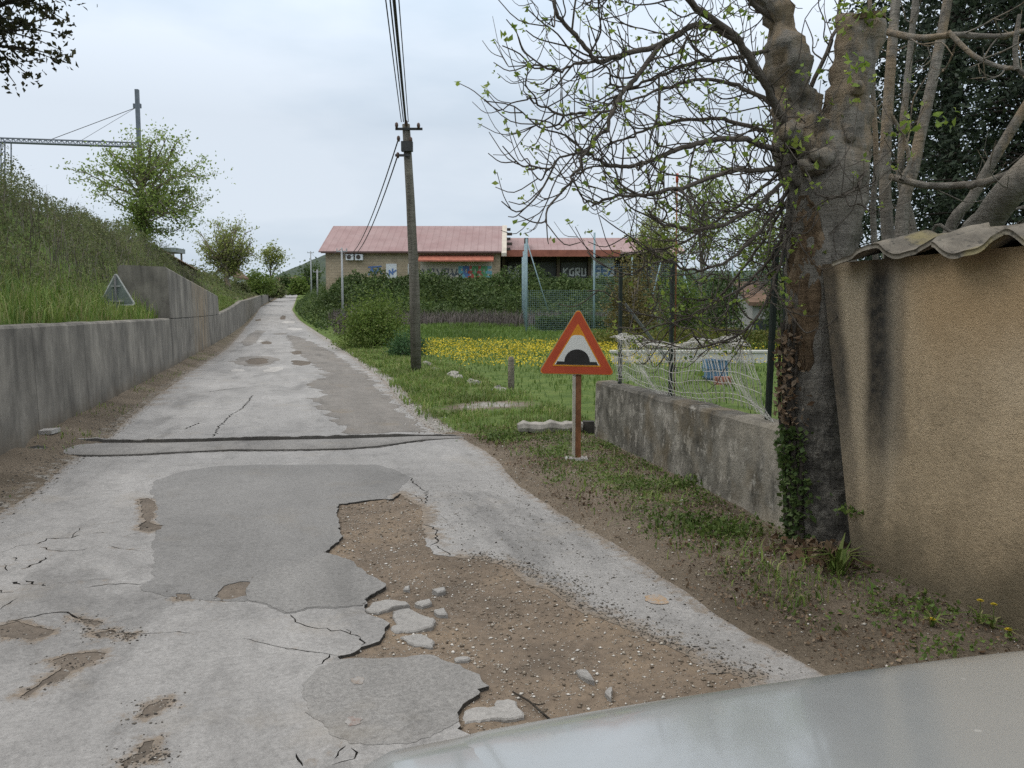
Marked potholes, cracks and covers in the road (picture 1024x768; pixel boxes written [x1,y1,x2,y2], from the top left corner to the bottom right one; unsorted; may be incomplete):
crack [291,615,366,645]
pothole [21,652,106,696]
crack [0,528,140,621]
pothole [138,498,164,532]
pothole [215,582,250,600]
pothole [0,621,53,640]
pothole [138,699,169,718]
pothole [120,740,154,766]
crack [89,378,423,466]
crack [244,638,340,665]
pothole [326,494,744,734]
